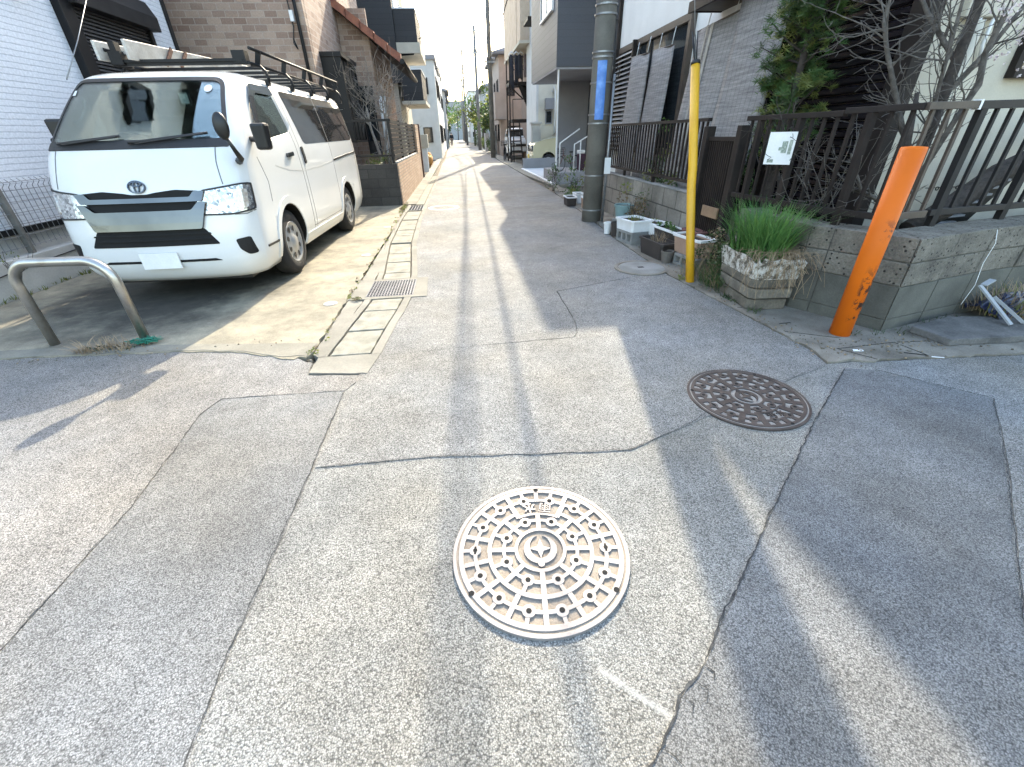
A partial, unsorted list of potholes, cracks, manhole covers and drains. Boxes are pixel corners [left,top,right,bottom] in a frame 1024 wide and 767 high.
drain grate [348,277,428,302]
manhole cover [614,260,669,276]
crack [648,364,845,767]
manhole cover [687,369,812,431]
manhole cover [453,486,630,641]
